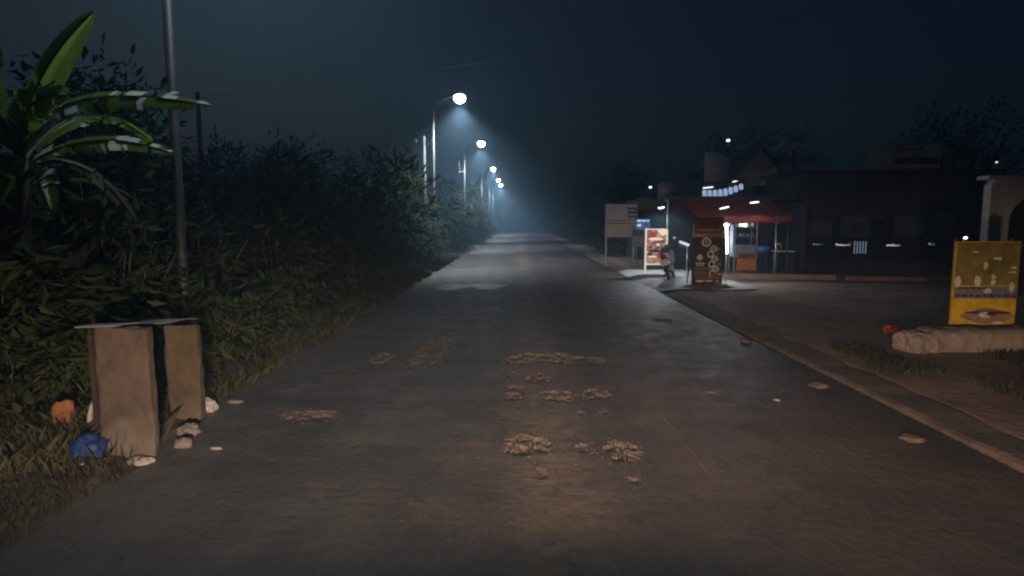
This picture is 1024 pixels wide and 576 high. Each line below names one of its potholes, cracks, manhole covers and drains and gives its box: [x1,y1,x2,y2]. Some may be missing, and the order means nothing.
pothole [499,434,554,457]
pothole [500,353,585,365]
pothole [365,352,397,369]
crack [606,334,750,528]
pothole [580,388,612,401]
pothole [536,391,575,404]
pothole [406,338,453,370]
pothole [505,384,526,401]
pothole [602,439,644,464]
